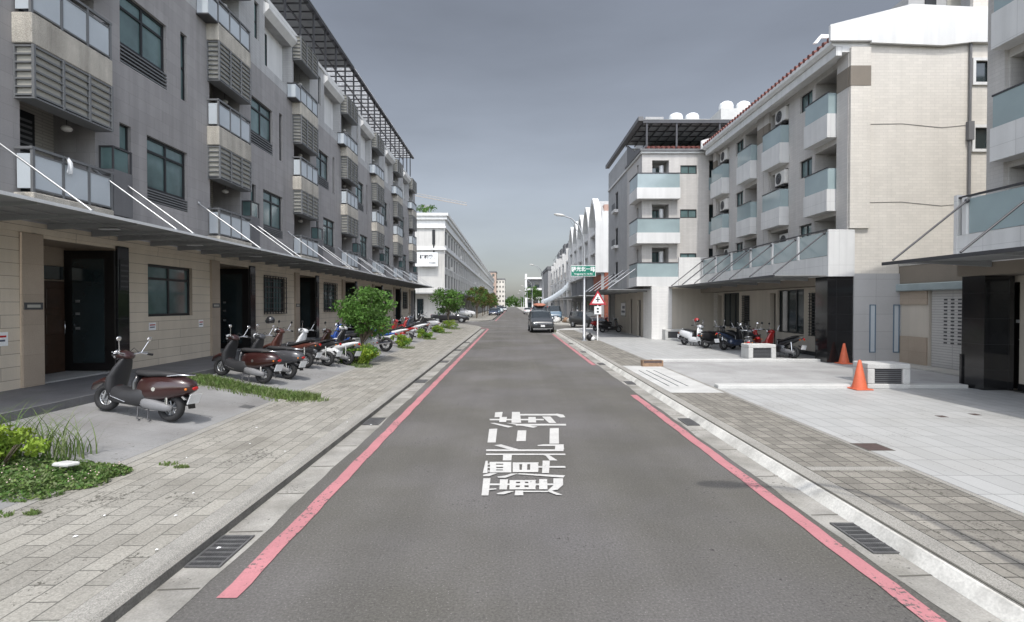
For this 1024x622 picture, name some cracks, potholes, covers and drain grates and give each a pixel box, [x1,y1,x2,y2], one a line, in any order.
drain grate [830,522,900,554]
drain grate [184,535,255,568]
drain grate [678,418,700,426]
utility cover [850,443,896,451]
